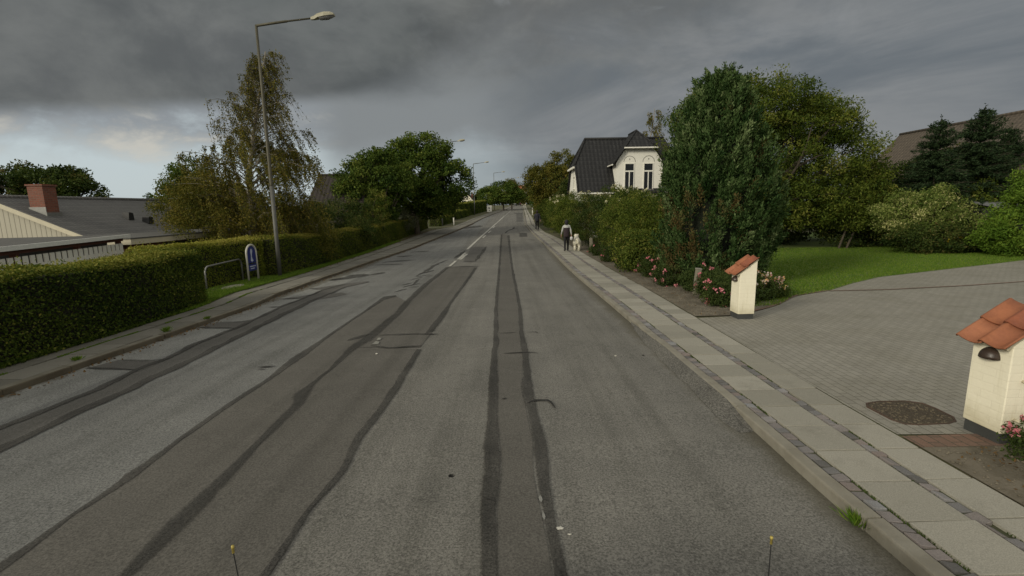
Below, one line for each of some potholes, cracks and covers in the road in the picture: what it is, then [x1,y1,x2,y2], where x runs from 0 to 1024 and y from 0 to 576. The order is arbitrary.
crack [382,251,465,292]
